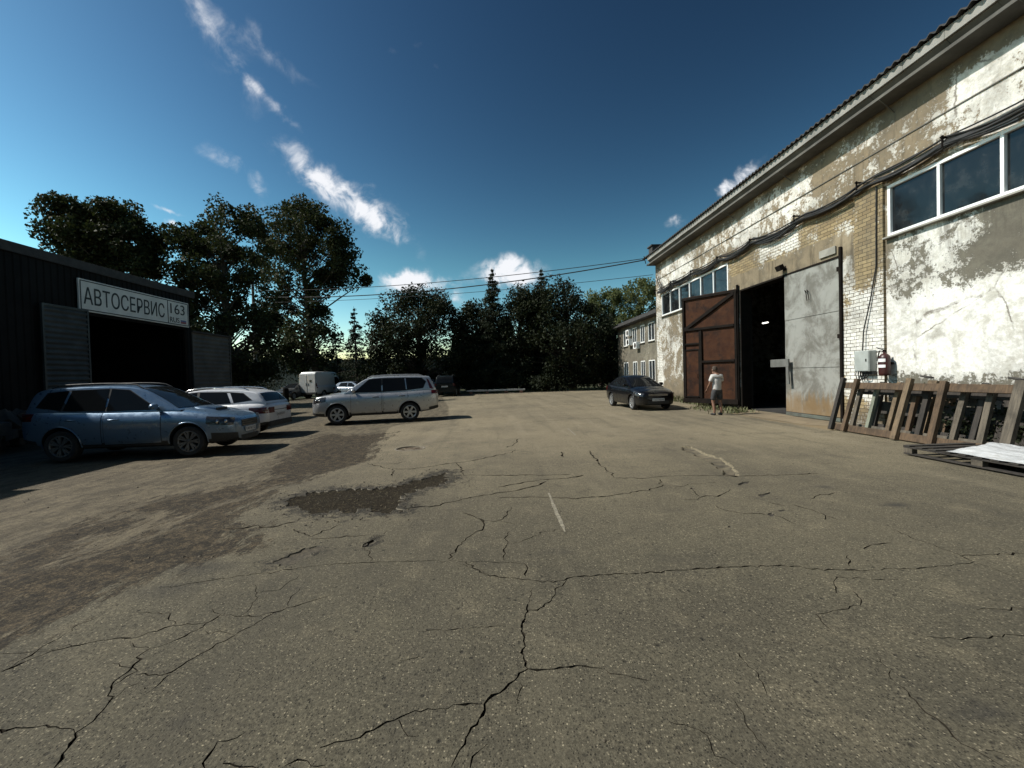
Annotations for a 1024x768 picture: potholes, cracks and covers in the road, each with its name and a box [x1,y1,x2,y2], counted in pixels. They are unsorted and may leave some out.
crack [162,510,1024,768]
crack [1,577,330,768]
crack [372,439,838,523]
